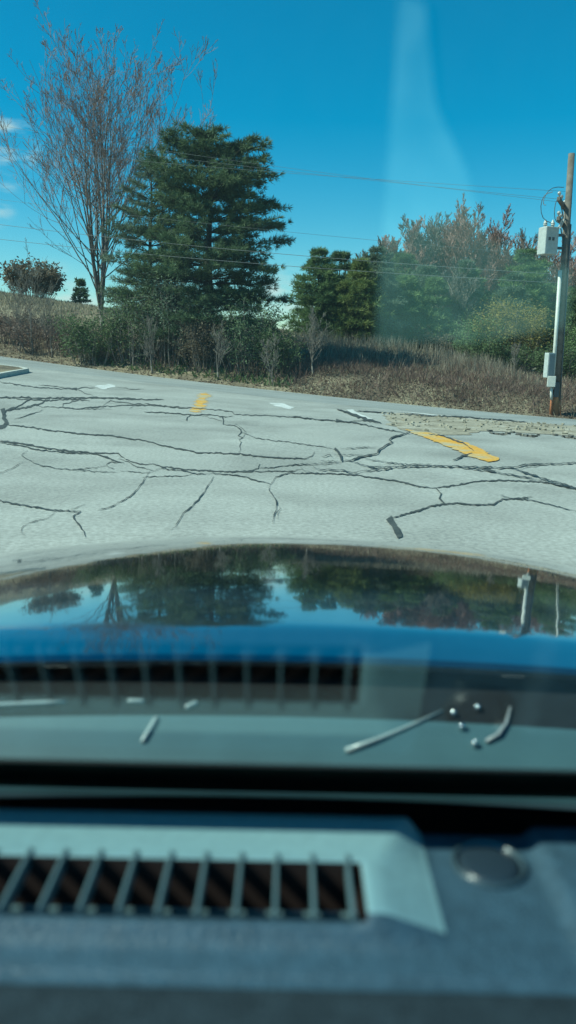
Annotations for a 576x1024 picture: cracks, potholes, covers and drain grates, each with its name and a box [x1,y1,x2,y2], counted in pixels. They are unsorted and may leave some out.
crack [0,424,575,538]
crack [1,382,128,394]
crack [289,409,410,434]
